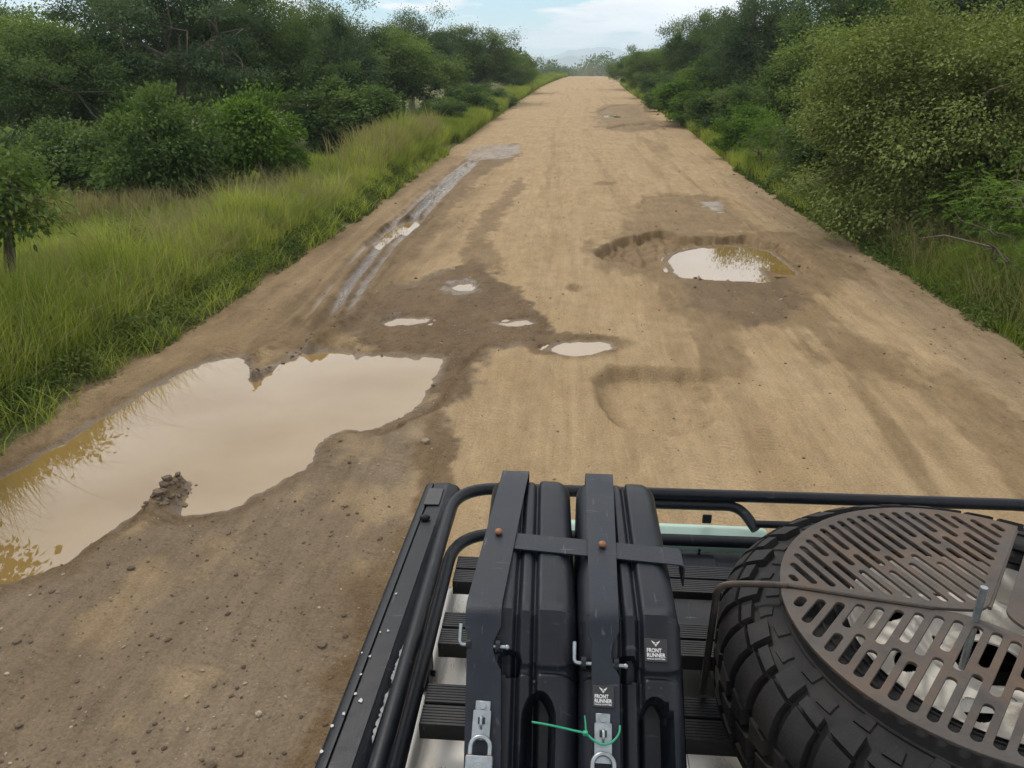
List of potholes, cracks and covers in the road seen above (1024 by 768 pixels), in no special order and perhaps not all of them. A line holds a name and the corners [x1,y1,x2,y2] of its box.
pothole [380,311,462,334]
pothole [0,330,469,606]
pothole [443,278,481,294]
pothole [588,228,823,283]
pothole [487,314,540,329]
pothole [532,334,624,359]
